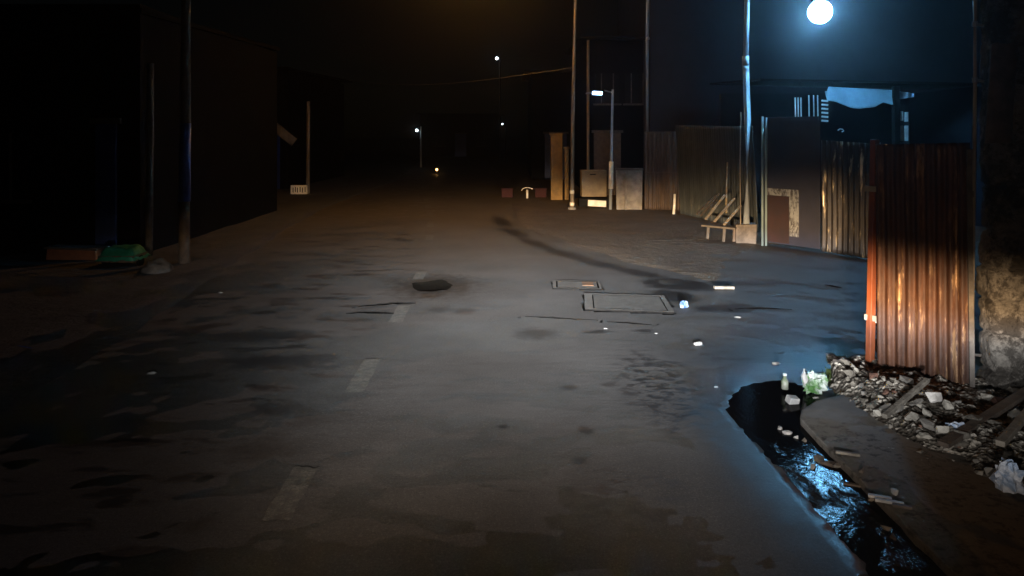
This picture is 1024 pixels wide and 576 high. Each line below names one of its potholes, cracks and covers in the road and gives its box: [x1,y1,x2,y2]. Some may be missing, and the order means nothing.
crack [521,314,658,328]
manhole cover [552,280,602,290]
crack [340,300,422,316]
manhole cover [584,293,674,315]
pothole [405,278,460,293]
